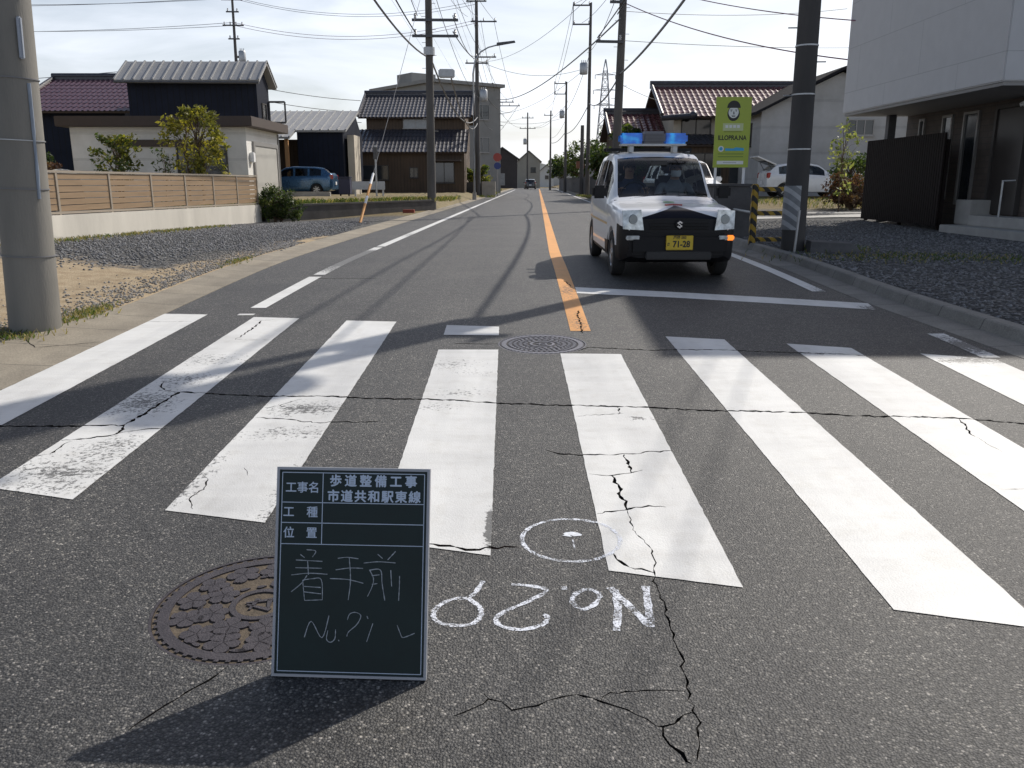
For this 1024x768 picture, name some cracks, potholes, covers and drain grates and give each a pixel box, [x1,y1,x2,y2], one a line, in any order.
manhole cover [498,334,586,354]
crack [0,384,1024,456]
crack [454,450,702,764]
crack [577,311,860,356]
manhole cover [148,556,275,666]
crack [129,666,228,730]
